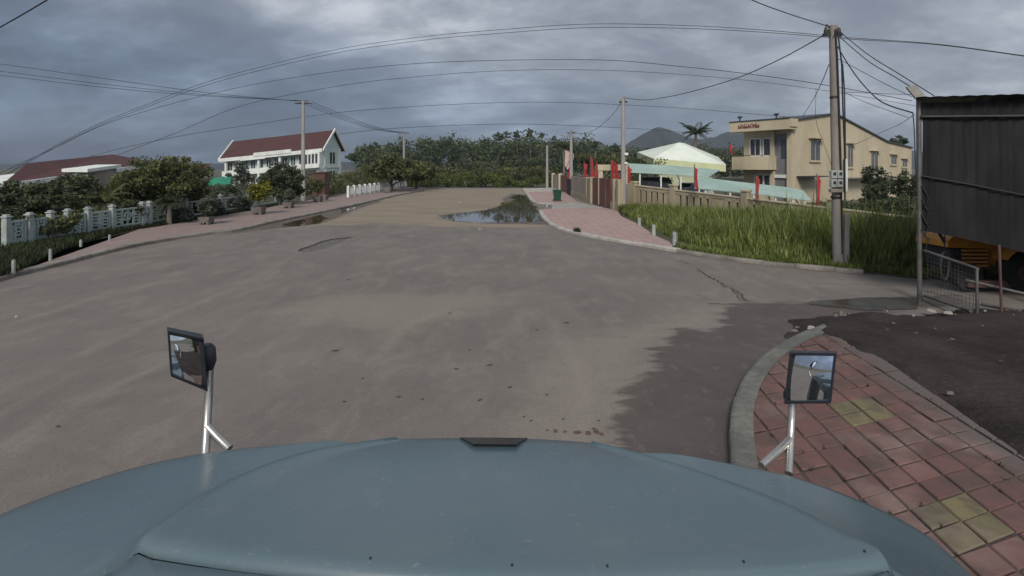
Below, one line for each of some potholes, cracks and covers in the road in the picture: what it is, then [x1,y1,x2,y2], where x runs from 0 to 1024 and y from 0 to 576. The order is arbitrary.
crack [682,261,747,305]
